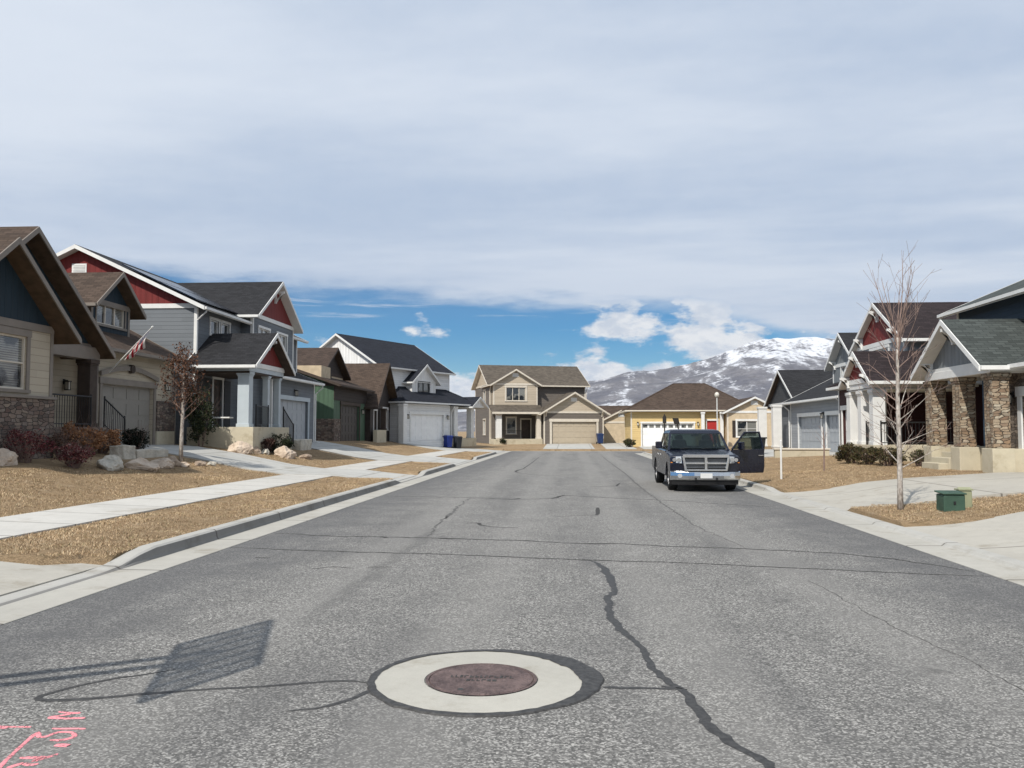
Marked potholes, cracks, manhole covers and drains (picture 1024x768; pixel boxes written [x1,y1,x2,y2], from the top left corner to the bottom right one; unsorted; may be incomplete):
manhole cover [366,649,605,717]
